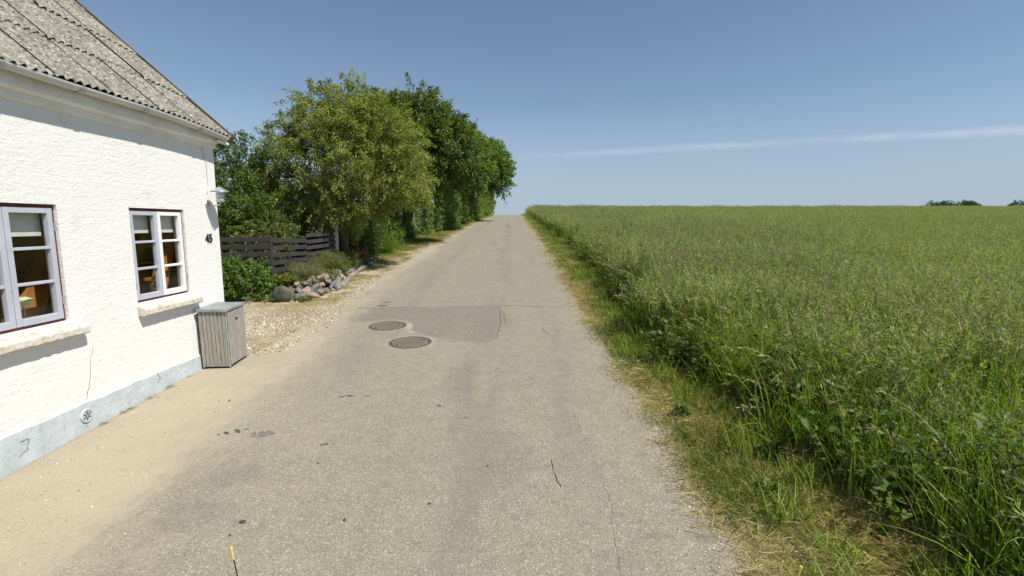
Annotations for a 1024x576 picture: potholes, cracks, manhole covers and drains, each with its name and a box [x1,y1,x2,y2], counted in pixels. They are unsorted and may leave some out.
manhole cover [388,336,432,349]
manhole cover [368,321,407,331]
